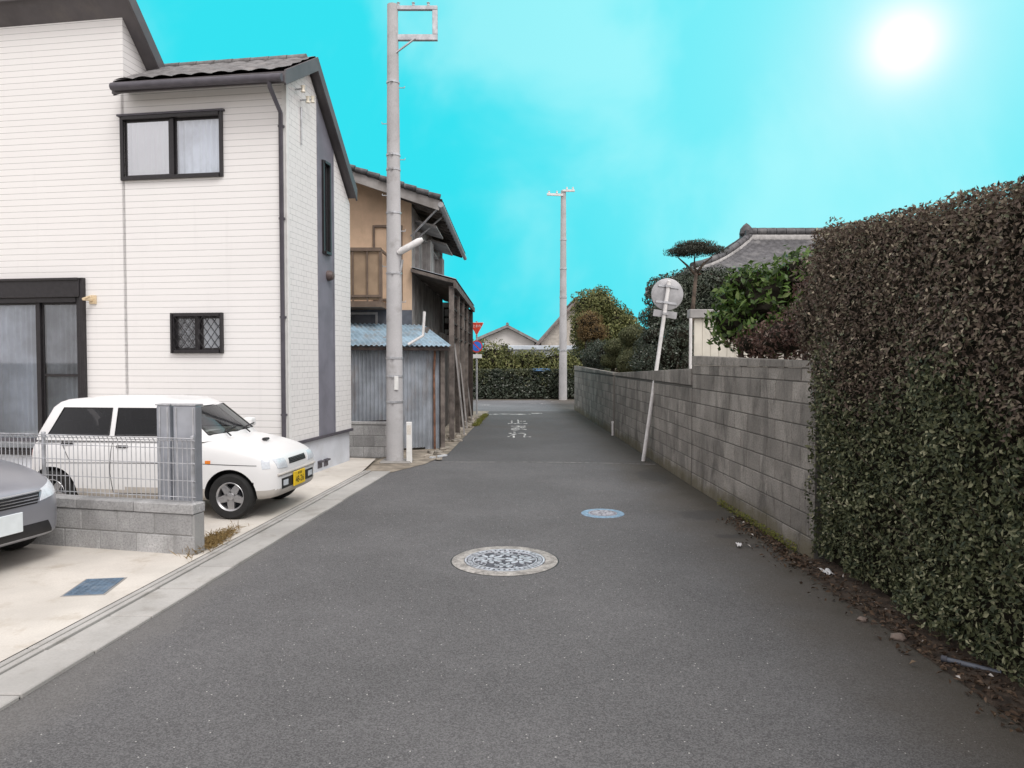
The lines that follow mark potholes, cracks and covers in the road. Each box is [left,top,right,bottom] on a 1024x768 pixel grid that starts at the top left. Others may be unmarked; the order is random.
manhole cover [581,509,624,518]
manhole cover [451,546,559,576]
